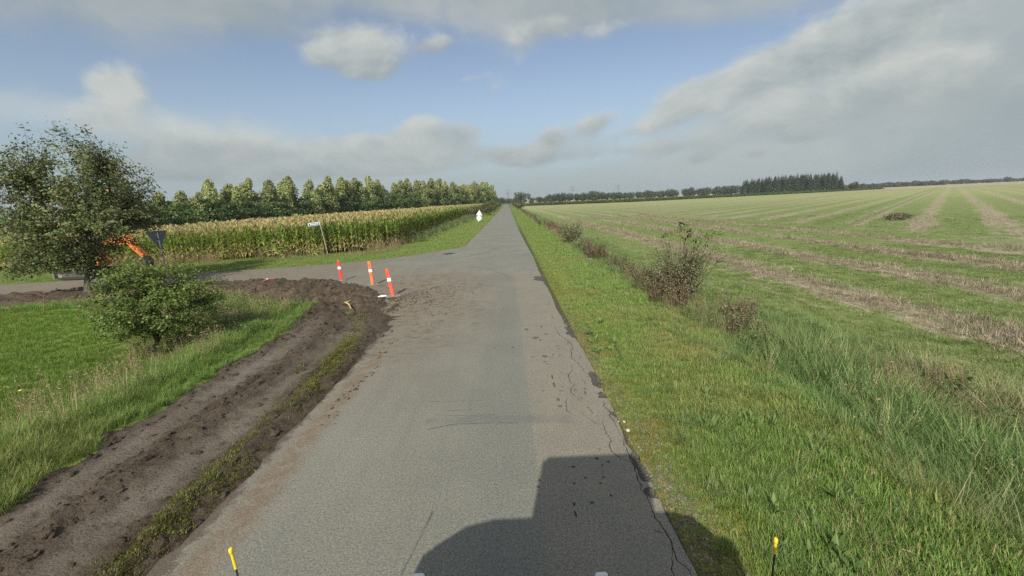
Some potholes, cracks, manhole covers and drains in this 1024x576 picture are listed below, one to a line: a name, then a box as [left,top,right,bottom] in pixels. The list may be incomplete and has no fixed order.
crack [548,301,692,576]
